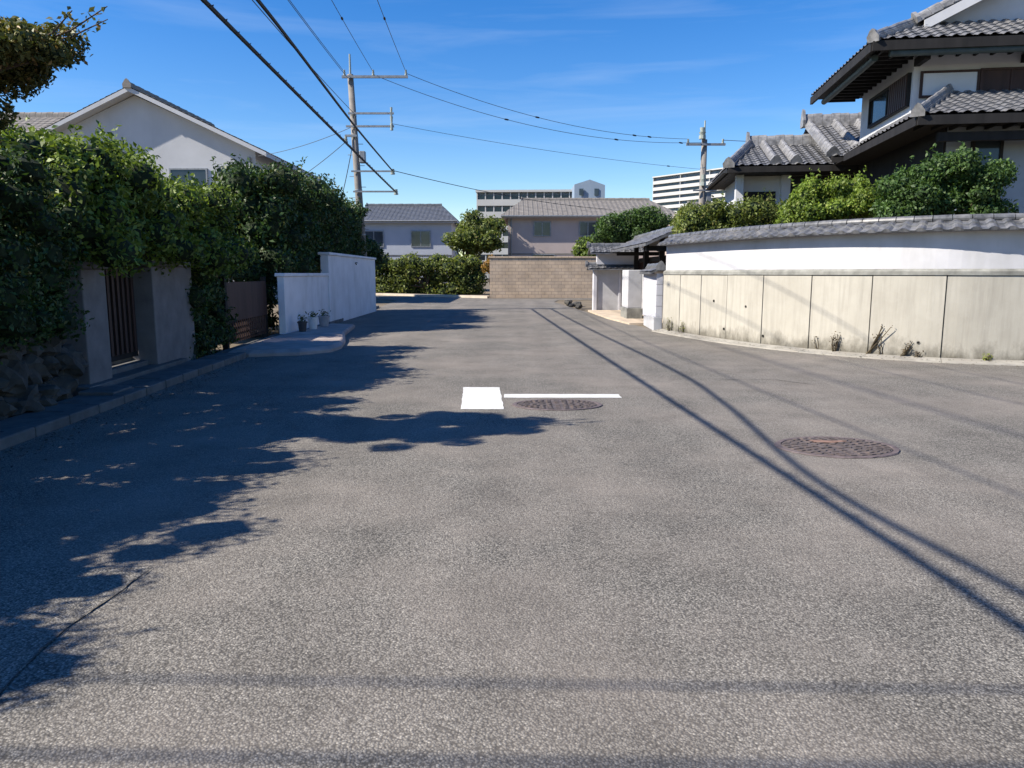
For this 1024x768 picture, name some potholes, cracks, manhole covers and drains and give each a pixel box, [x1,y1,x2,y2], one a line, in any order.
manhole cover [774,436,901,458]
crack [0,567,152,692]
manhole cover [512,399,603,411]
